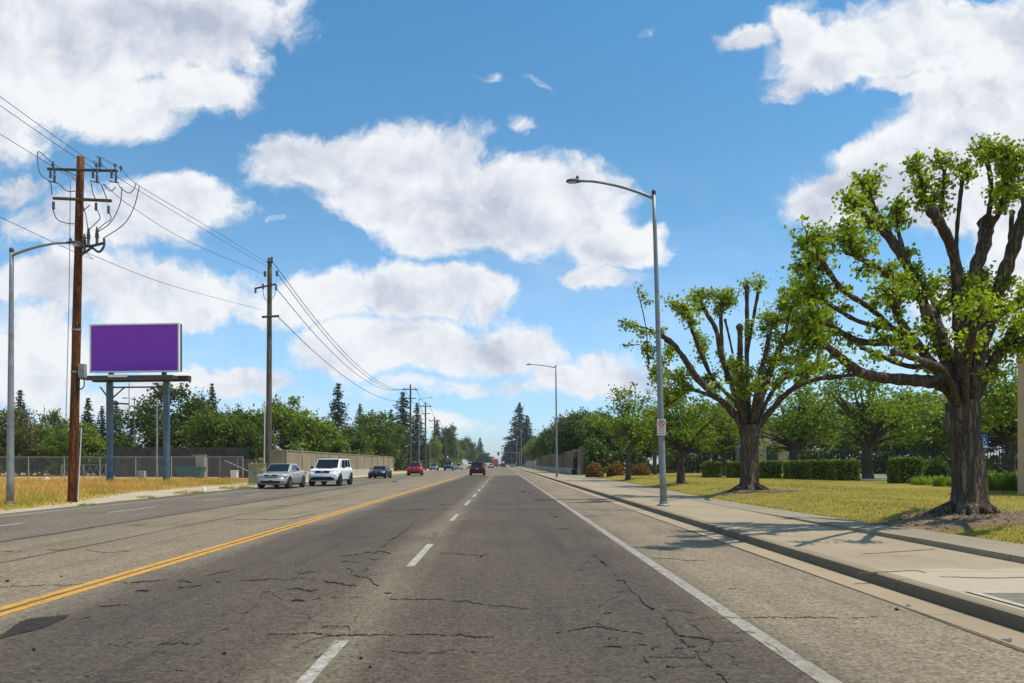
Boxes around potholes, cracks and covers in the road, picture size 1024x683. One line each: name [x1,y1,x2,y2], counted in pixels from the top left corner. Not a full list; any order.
crack [74,522,528,658]
crack [556,547,875,683]
